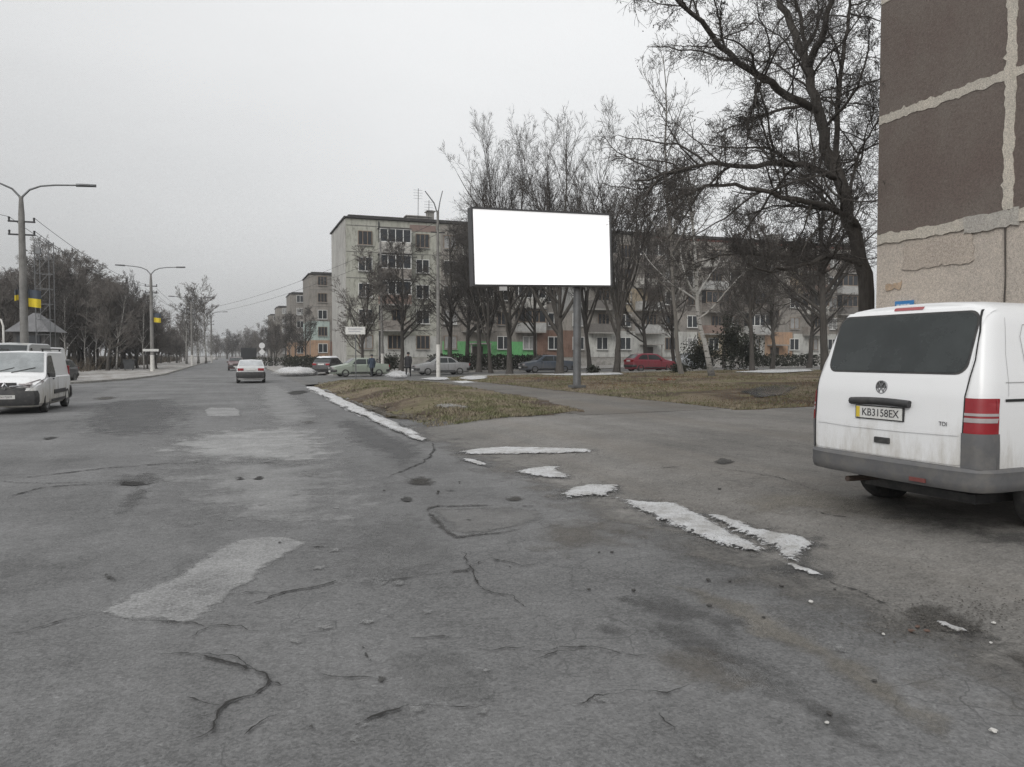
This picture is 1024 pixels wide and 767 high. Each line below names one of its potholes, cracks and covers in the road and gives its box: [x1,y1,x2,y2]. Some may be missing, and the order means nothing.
crack [242,555,538,608]
crack [561,685,686,706]
crack [486,645,650,659]
pothole [904,605,979,632]
pothole [408,477,434,485]
crack [126,618,286,740]
